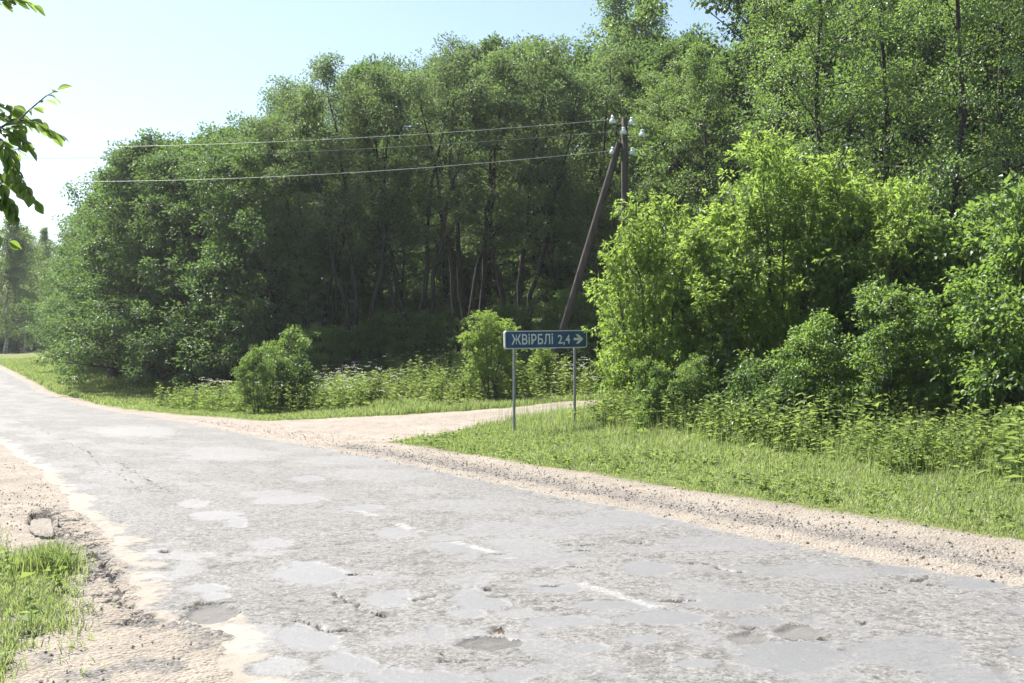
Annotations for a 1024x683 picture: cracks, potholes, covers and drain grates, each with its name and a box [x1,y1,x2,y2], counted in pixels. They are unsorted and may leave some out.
pothole [773,624,827,641]
crack [294,620,354,633]
pothole [186,603,238,625]
crack [331,573,379,617]
pothole [454,636,523,651]
crack [18,420,163,492]
pothole [727,633,771,645]
